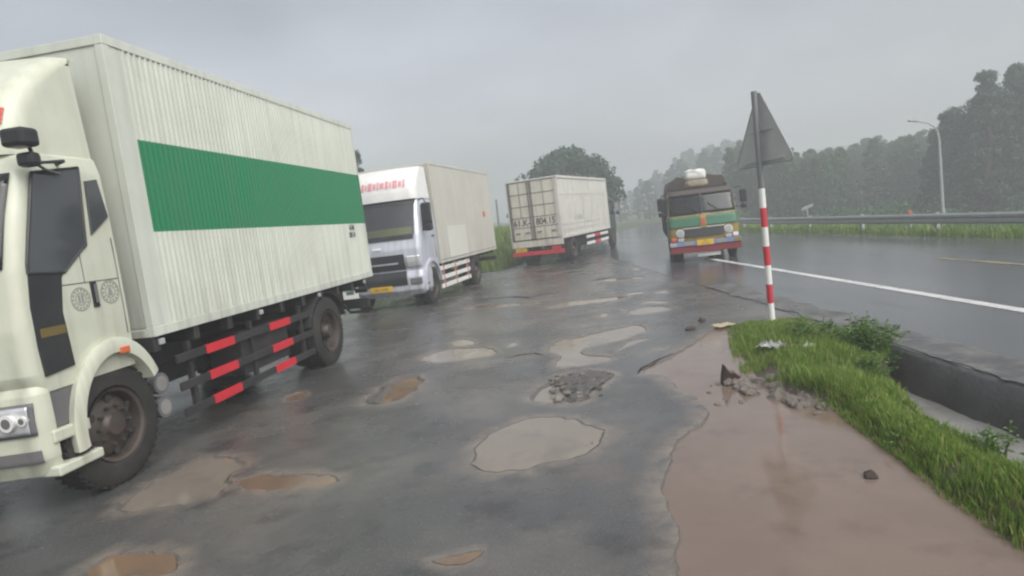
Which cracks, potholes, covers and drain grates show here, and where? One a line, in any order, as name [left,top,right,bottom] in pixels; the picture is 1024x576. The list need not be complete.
pothole [234,473,339,492]
pothole [431,550,485,566]
pothole [363,375,425,404]
crack [637,353,674,374]
pothole [529,369,615,404]
pothole [283,391,308,401]
pothole [547,324,647,368]
pothole [545,297,629,308]
pothole [470,416,605,473]
pothole [419,347,499,362]
pothole [115,455,248,513]
pothole [82,550,180,576]
